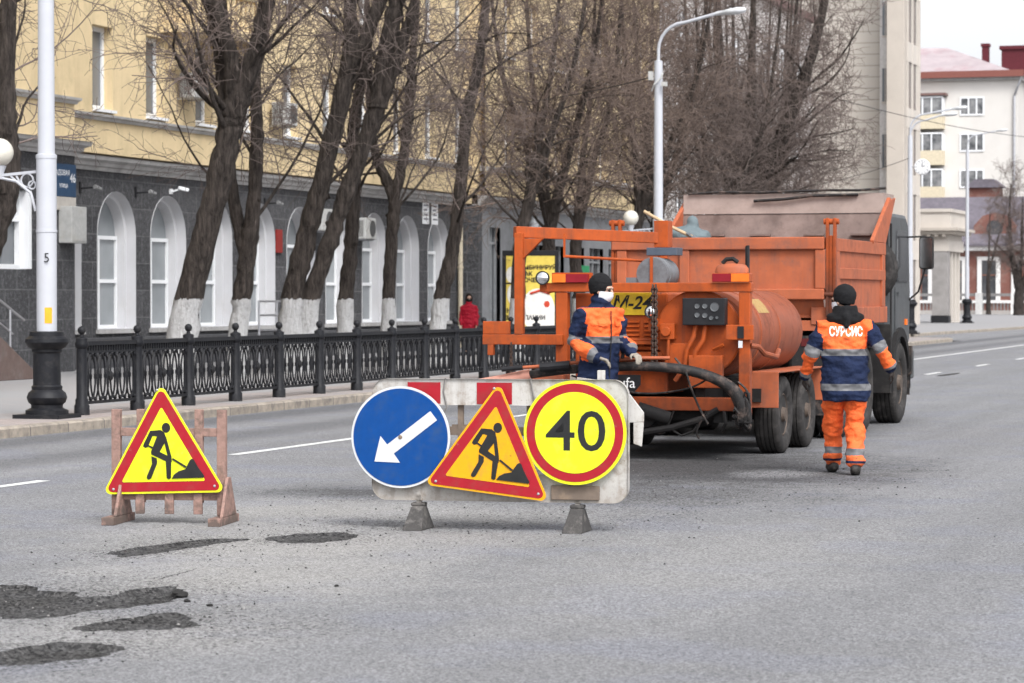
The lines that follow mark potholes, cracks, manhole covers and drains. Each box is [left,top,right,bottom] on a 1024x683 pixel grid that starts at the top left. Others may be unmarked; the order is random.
pothole [71,612,202,632]
pothole [265,532,358,544]
pothole [107,538,250,557]
pothole [0,642,126,666]
pothole [0,585,184,619]
